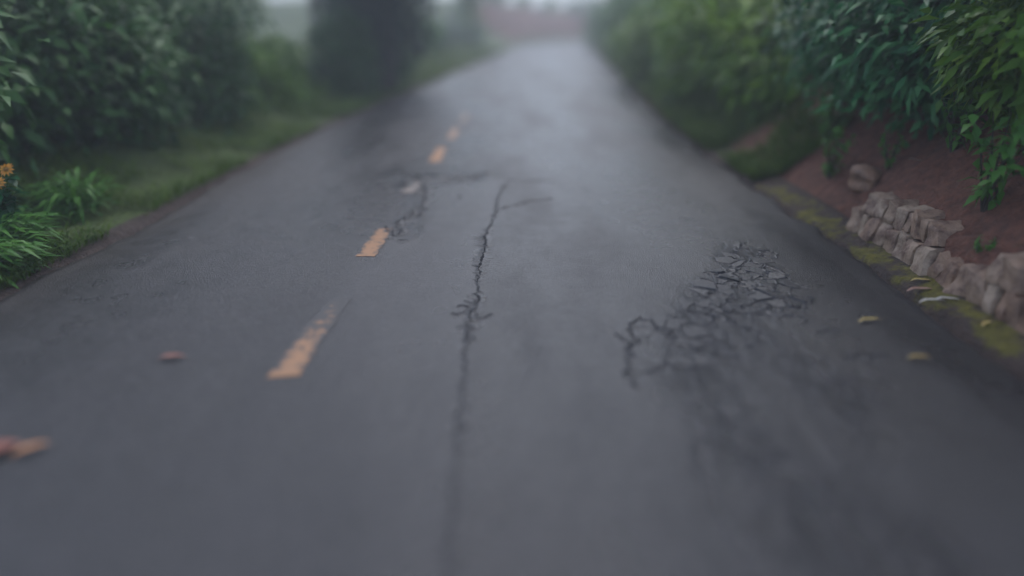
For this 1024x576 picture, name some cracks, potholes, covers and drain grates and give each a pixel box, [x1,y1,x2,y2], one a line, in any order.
crack [376,172,556,576]
crack [614,242,840,388]
